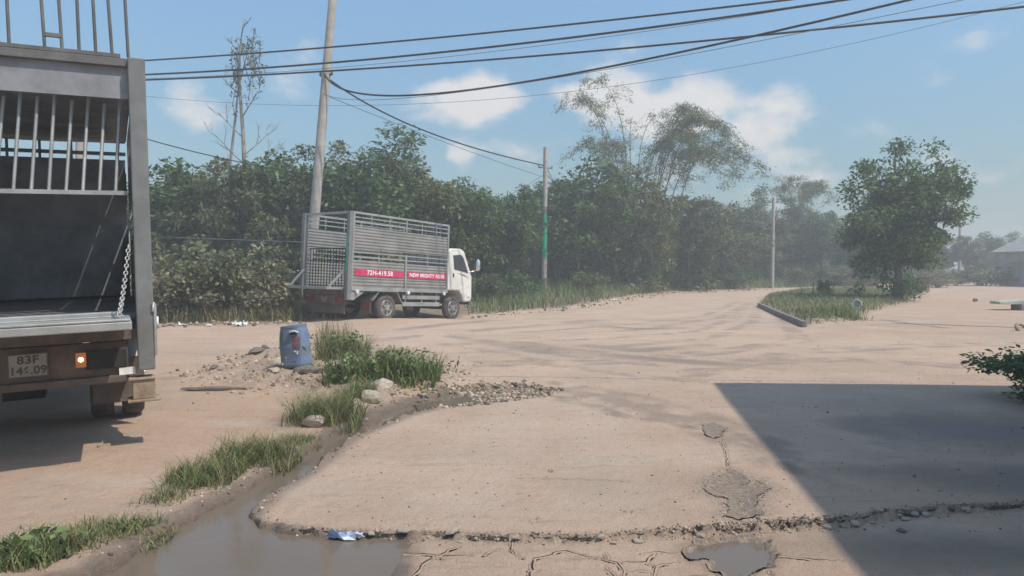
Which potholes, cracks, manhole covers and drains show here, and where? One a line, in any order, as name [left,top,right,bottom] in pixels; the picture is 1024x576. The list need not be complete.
pothole [704,470,769,519]
crack [298,504,1024,576]
pothole [681,535,779,576]
crack [718,439,730,470]
pothole [702,422,725,438]
